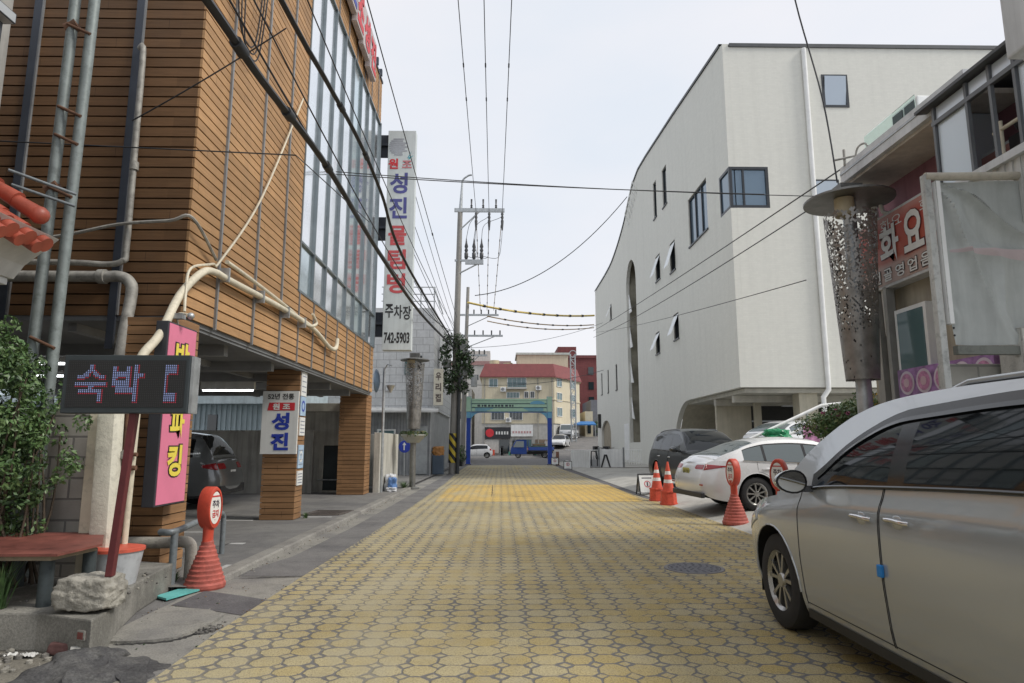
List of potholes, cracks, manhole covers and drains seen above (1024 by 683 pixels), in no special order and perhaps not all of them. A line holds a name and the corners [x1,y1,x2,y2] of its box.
manhole cover [664,563,725,574]
